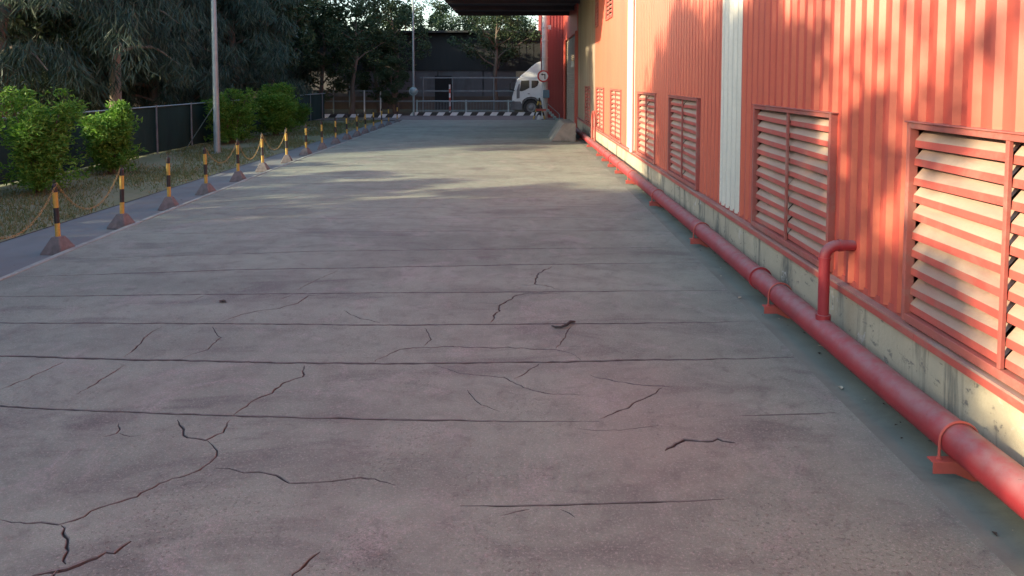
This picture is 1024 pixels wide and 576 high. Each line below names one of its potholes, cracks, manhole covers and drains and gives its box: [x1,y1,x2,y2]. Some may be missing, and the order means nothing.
crack [491,267,560,322]
crack [2,367,394,576]
crack [584,375,735,451]
crack [375,327,577,411]
crack [79,327,161,393]
